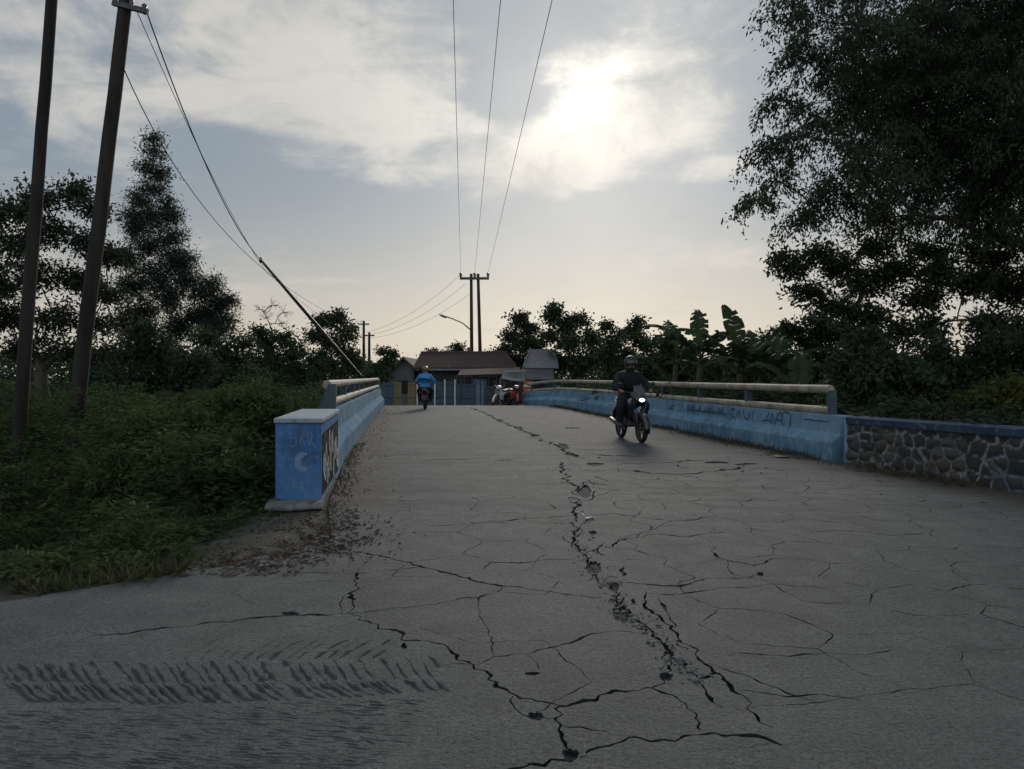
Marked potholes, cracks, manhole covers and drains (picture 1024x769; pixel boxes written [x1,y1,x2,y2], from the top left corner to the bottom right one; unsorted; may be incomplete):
crack [86,407,1024,769]
pothole [586,561,601,573]
pothole [528,712,544,721]
pothole [562,748,579,763]
pothole [577,485,591,498]
